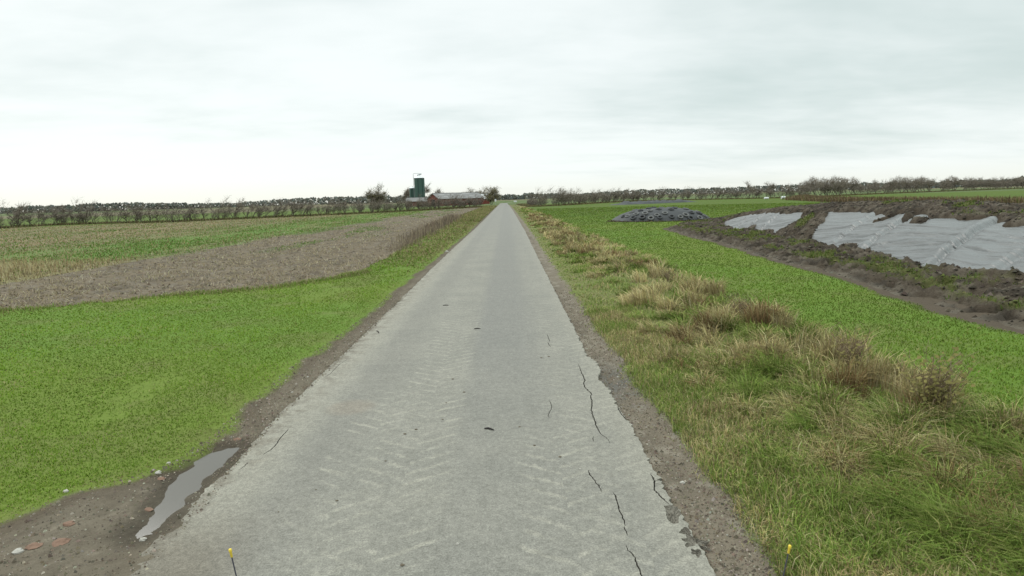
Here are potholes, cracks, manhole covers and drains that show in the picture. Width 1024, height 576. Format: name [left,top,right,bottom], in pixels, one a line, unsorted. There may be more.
crack [579,368,626,441]
crack [588,470,642,576]
pothole [682,534,712,551]
pothole [664,505,681,524]
